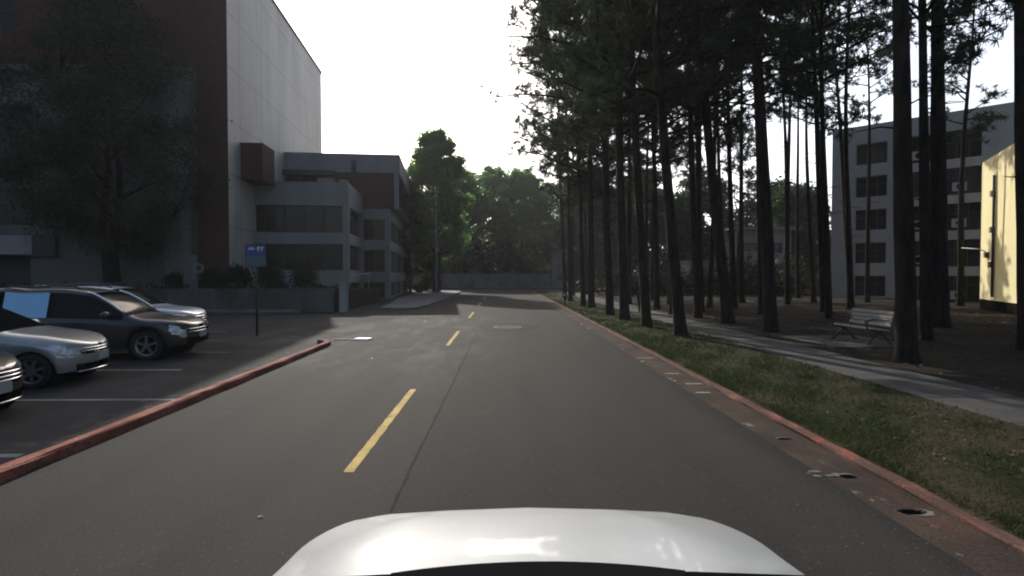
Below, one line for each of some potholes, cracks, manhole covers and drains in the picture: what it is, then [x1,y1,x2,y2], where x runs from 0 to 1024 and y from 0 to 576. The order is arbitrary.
pothole [808,470,857,479]
pothole [896,508,935,516]
